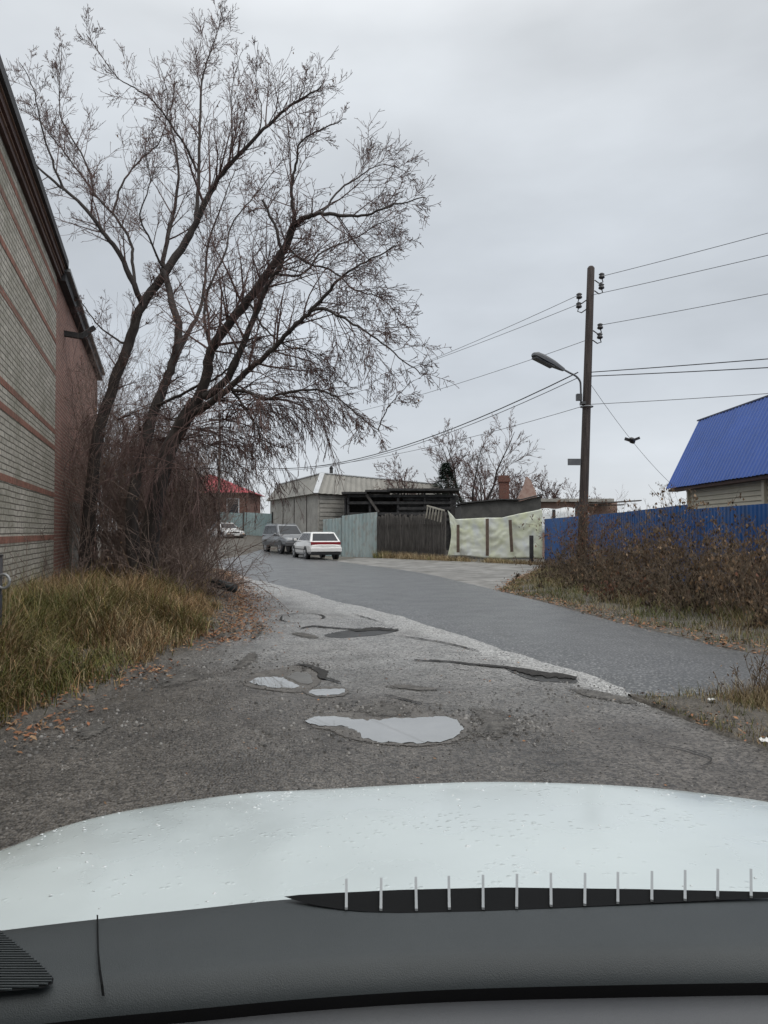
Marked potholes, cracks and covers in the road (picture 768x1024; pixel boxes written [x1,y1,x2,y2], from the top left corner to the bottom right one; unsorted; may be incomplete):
pothole [242,664,323,693]
pothole [305,702,475,746]
pothole [326,627,399,638]
pothole [504,667,578,683]
pothole [304,686,349,697]
